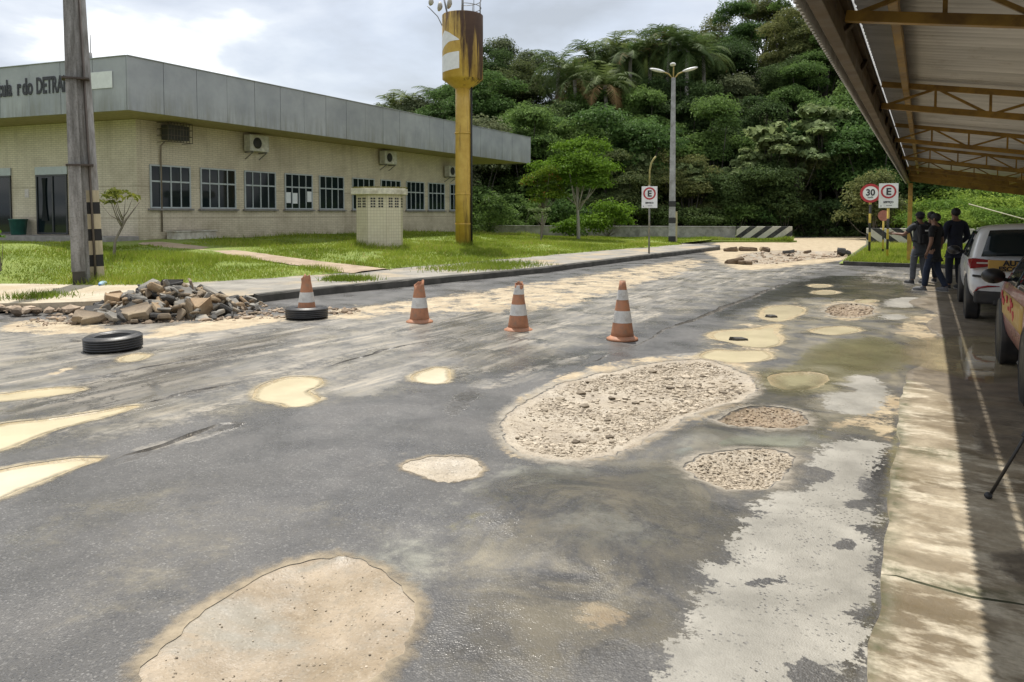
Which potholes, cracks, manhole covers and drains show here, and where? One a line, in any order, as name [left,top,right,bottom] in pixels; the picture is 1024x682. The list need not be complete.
crack [109,422,246,462]
pothole [707,405,816,431]
pothole [676,446,802,492]
pothole [820,303,877,318]
pothole [493,358,765,466]
